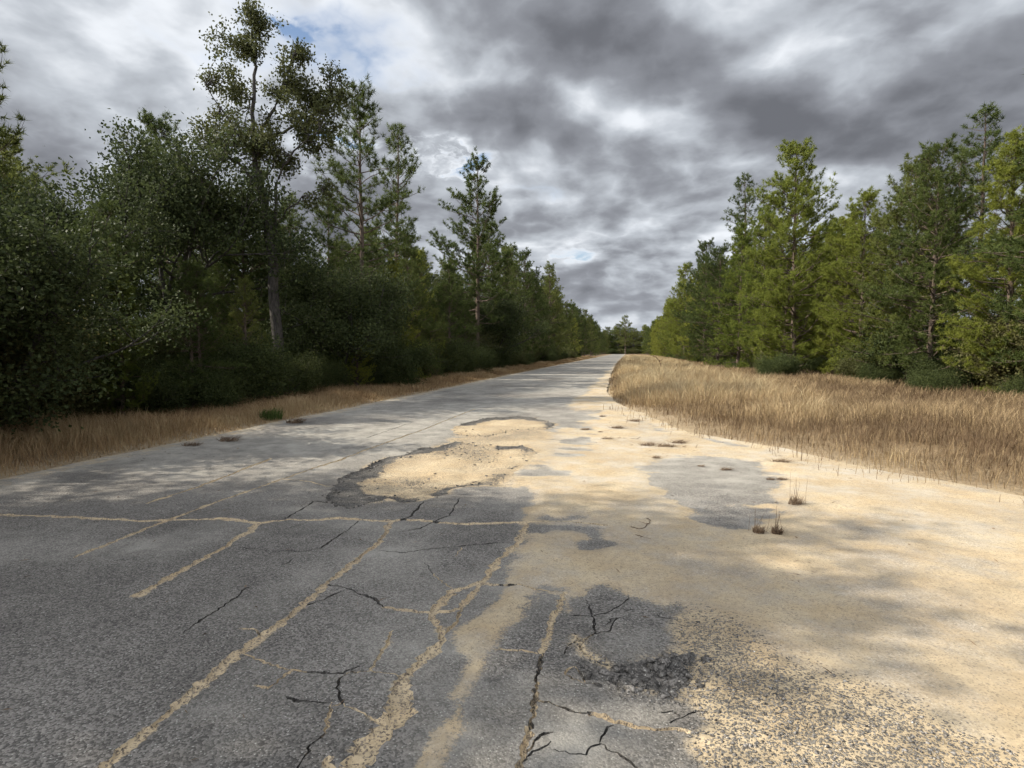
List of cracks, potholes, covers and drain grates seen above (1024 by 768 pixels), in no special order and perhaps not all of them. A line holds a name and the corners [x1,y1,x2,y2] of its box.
pothole [578,651,712,699]
crack [538,596,707,768]
pothole [450,415,556,438]
crack [0,479,608,768]
pothole [321,441,537,509]
